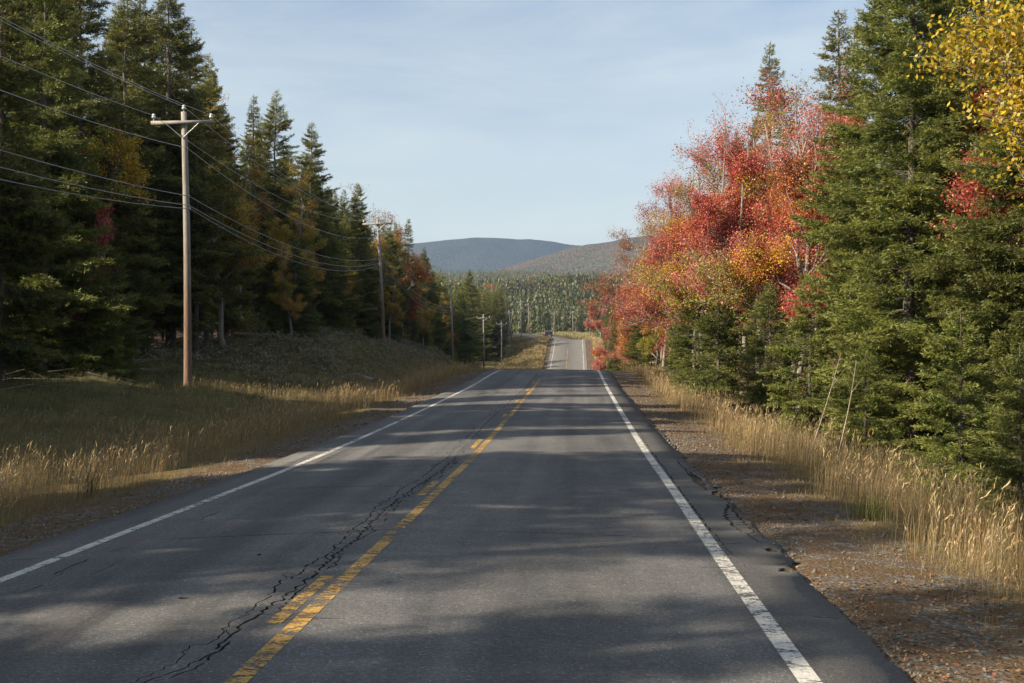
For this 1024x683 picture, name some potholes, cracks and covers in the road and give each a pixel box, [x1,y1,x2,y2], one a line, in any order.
crack [15,371,639,683]
crack [640,433,768,568]
